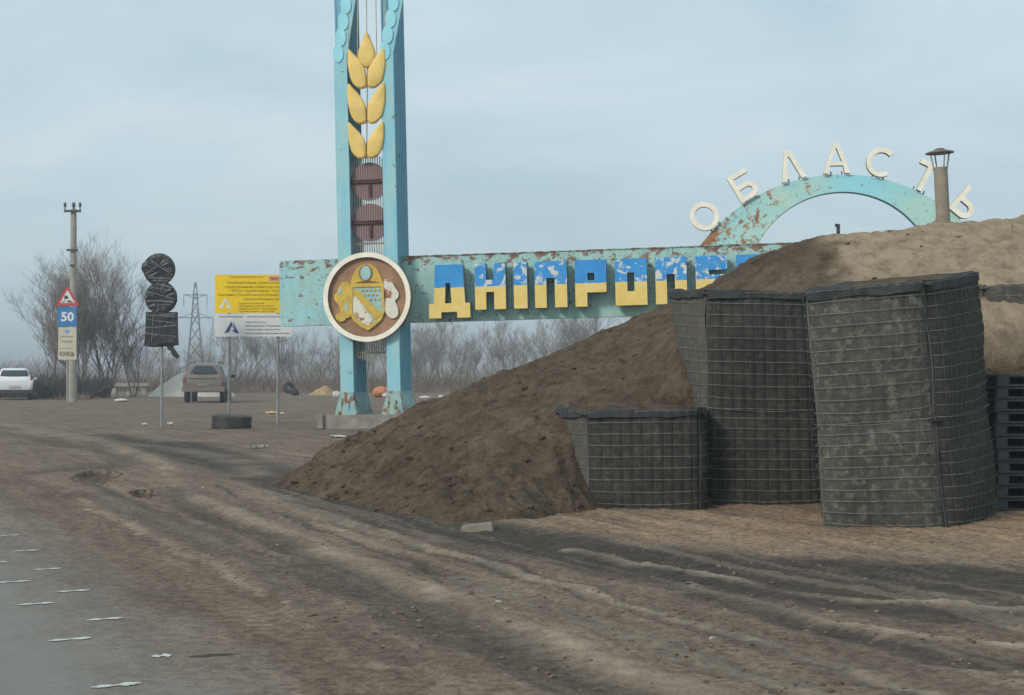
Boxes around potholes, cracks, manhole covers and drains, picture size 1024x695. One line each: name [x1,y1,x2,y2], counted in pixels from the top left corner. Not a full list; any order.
pothole [69,468,124,486]
pothole [127,489,154,499]
